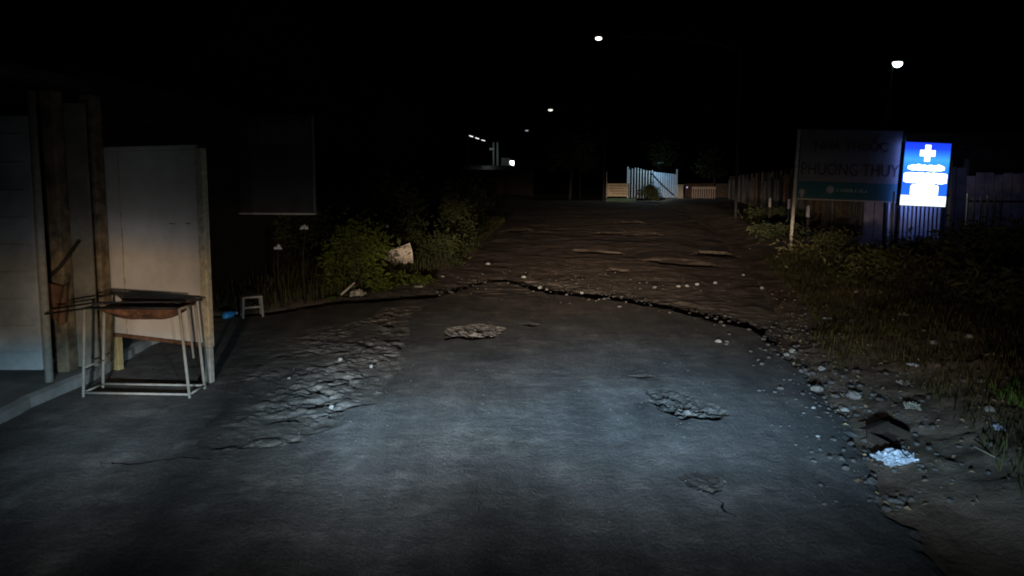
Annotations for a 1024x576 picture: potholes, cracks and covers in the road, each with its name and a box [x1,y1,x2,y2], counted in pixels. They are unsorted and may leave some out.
pothole [643,387,731,422]
crack [99,456,214,465]
pothole [442,324,506,341]
pothole [675,472,725,495]
